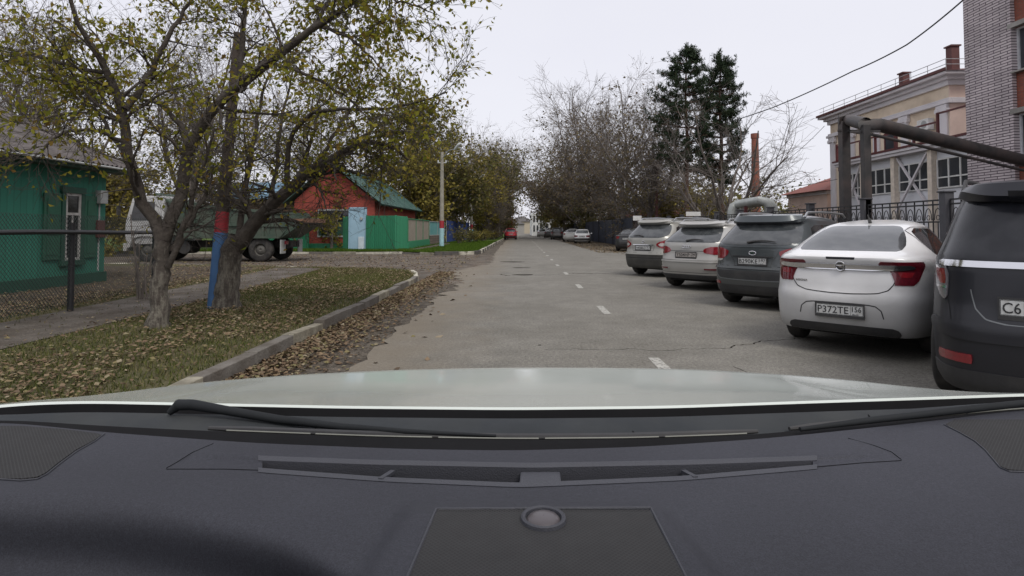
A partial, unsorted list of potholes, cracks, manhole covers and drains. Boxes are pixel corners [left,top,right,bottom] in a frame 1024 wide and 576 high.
crack [544,338,795,351]
